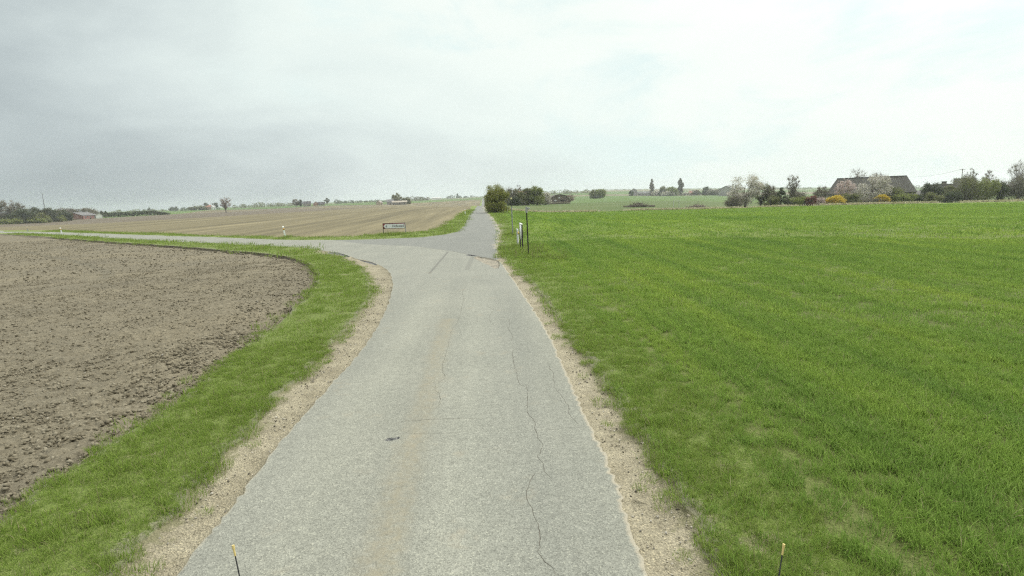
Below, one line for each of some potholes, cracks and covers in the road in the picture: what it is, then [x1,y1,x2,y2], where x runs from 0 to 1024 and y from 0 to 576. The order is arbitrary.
crack [489,307,580,574]
